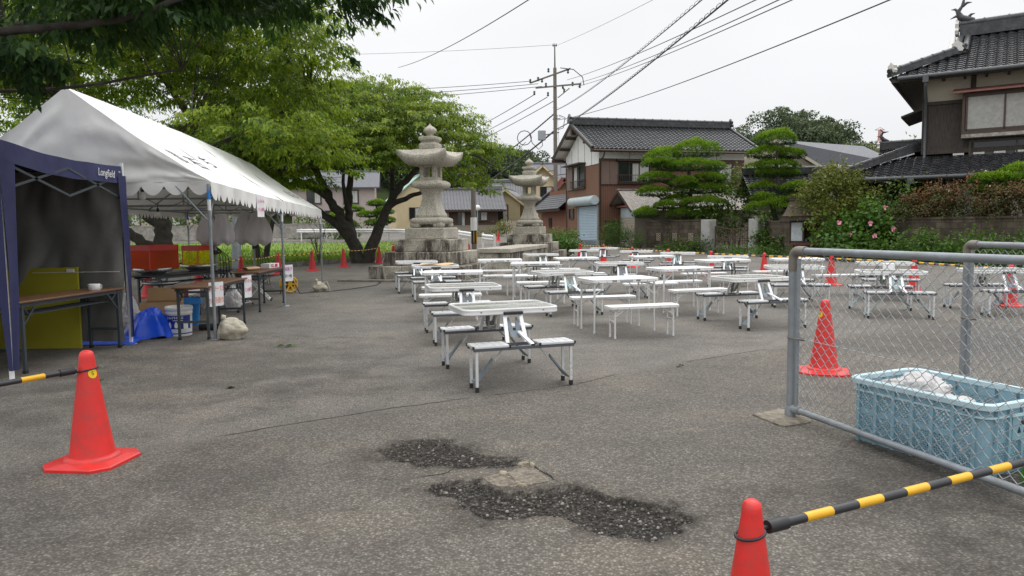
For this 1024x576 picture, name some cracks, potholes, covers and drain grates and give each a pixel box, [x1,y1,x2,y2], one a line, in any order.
pothole [371,439,520,469]
pothole [423,478,695,543]
